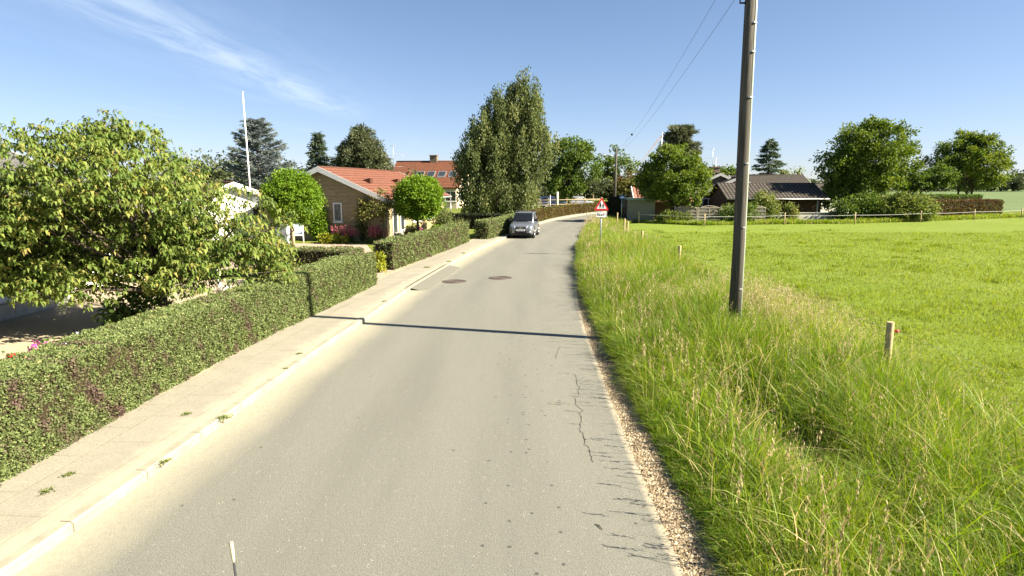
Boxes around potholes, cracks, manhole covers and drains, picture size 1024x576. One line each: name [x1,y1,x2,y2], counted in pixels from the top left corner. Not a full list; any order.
crack [574,379,592,460]
